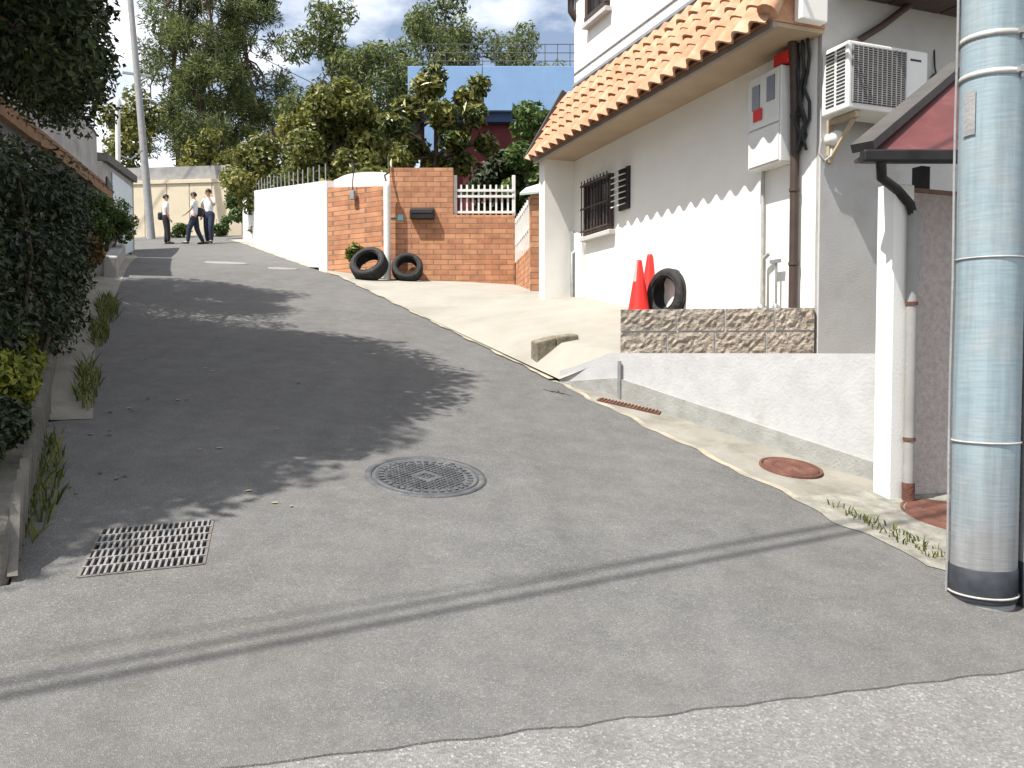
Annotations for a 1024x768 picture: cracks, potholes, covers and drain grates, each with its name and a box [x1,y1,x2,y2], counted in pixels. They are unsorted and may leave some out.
manhole cover [900,499,950,530]
manhole cover [365,456,486,498]
manhole cover [759,457,823,479]
drain grate [76,519,214,578]
